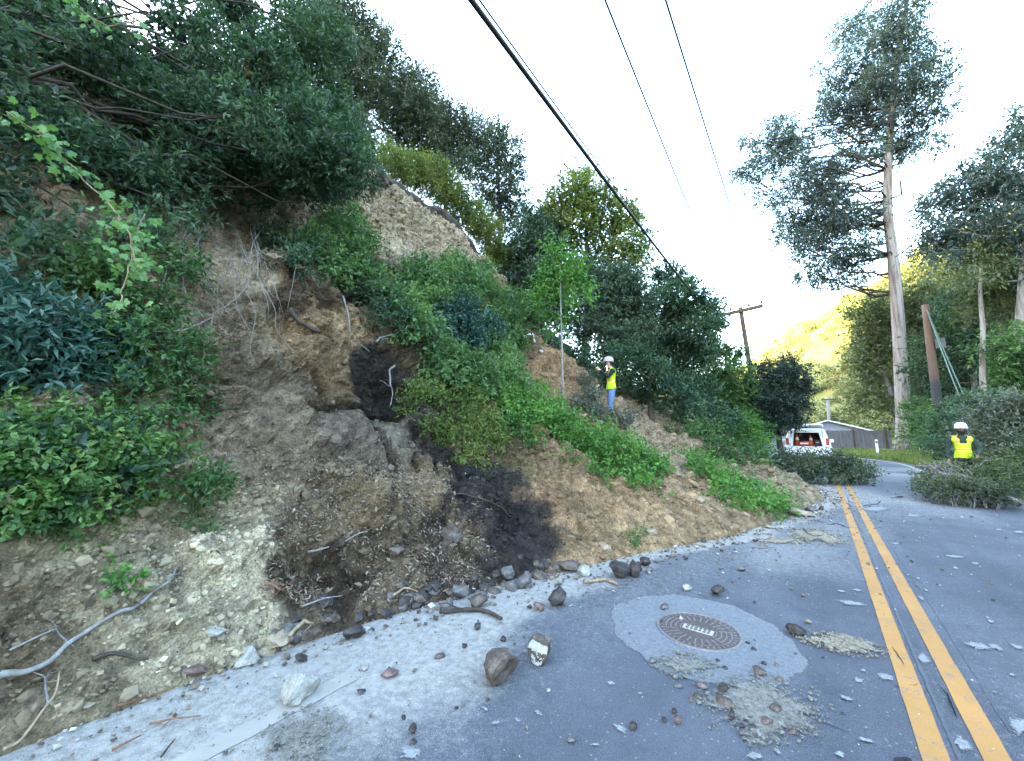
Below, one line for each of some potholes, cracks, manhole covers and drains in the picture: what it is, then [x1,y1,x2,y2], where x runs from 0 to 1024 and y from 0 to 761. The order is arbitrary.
manhole cover [656,611,744,652]
